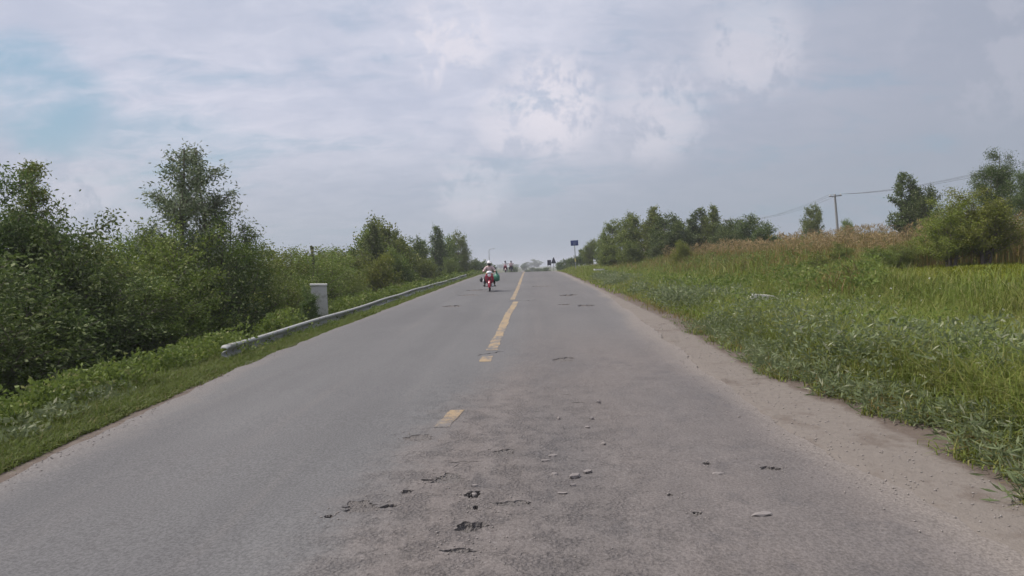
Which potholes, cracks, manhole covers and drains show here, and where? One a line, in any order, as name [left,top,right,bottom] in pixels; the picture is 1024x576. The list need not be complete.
pothole [403,434,433,442]
pothole [454,521,490,533]
pothole [492,449,515,457]
pothole [342,500,380,513]
